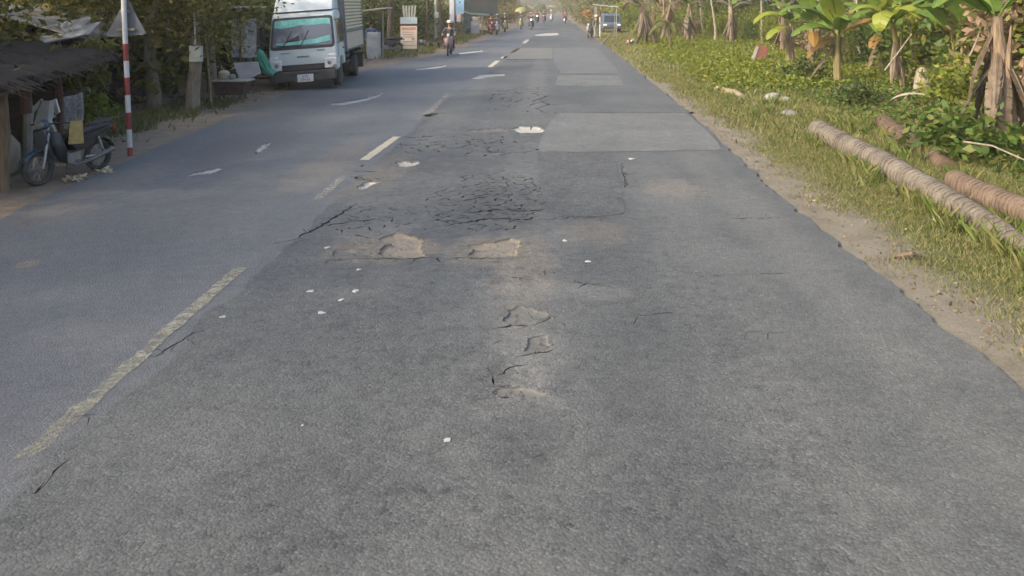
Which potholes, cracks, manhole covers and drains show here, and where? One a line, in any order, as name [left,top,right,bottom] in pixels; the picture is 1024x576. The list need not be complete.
pothole [378,232,426,258]
crack [34,459,69,494]
pothole [467,238,523,257]
crack [624,311,784,350]
crack [488,86,694,114]
crack [140,328,207,363]
pothole [492,385,547,402]
crack [274,172,779,244]
pothole [502,305,549,325]
pothole [524,335,554,351]
